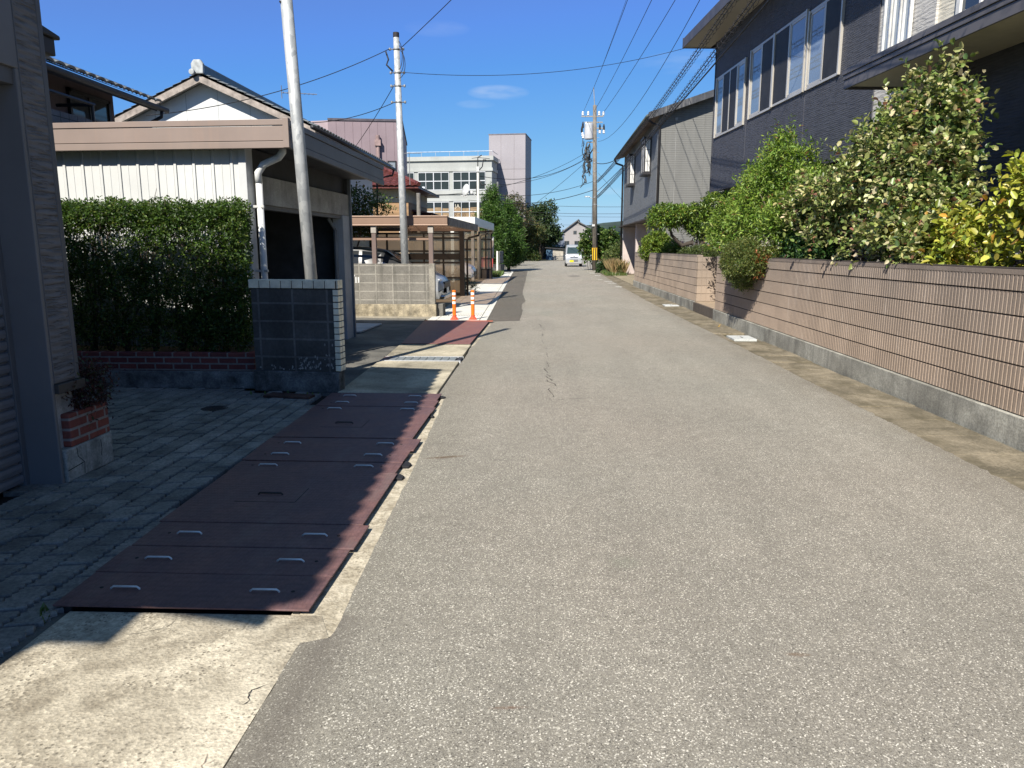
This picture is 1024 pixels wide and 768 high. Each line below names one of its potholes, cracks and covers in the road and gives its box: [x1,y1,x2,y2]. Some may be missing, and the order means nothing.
drain grate [379,356,464,364]
